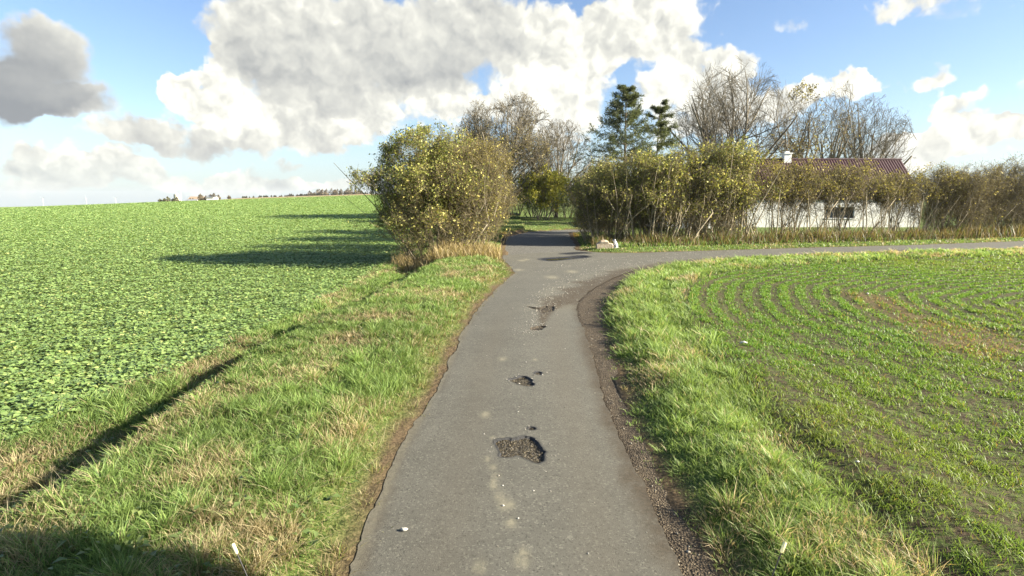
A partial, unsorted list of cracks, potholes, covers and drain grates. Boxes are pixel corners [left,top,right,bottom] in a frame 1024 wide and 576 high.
pothole [508,376,535,386]
pothole [494,436,546,463]
pothole [527,306,555,314]
